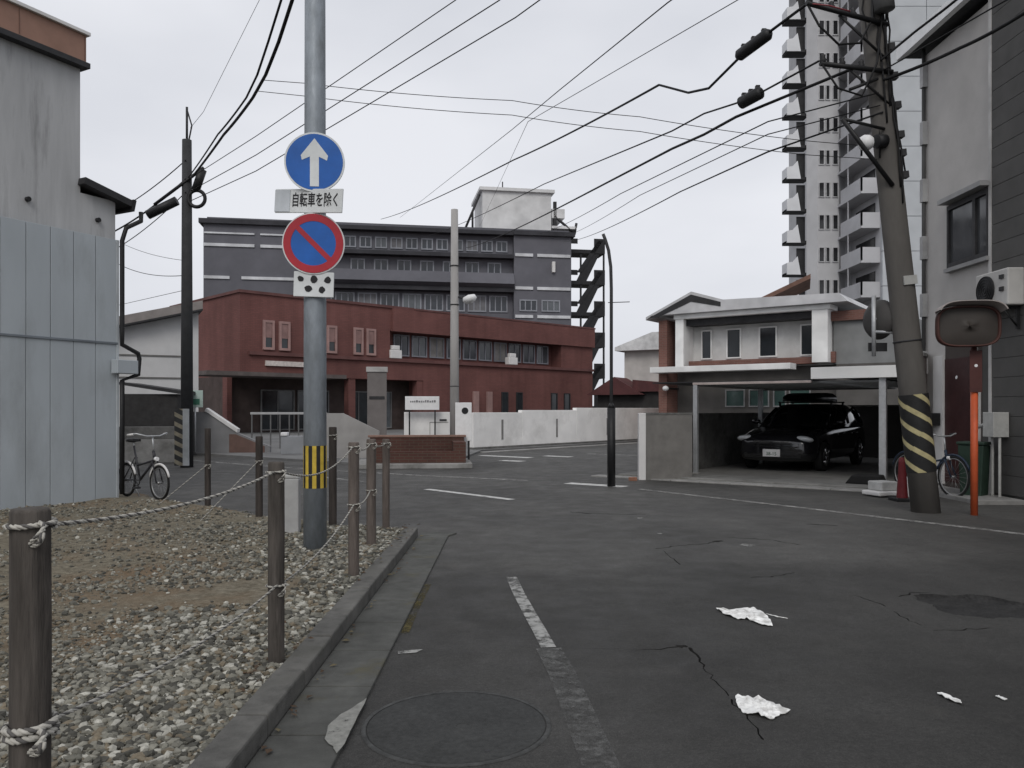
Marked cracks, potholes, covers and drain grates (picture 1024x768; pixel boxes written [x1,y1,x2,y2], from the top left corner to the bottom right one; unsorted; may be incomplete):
crack [854,592,987,631]
manhole cover [360,691,551,767]
crack [576,645,764,740]
crack [655,540,722,564]
